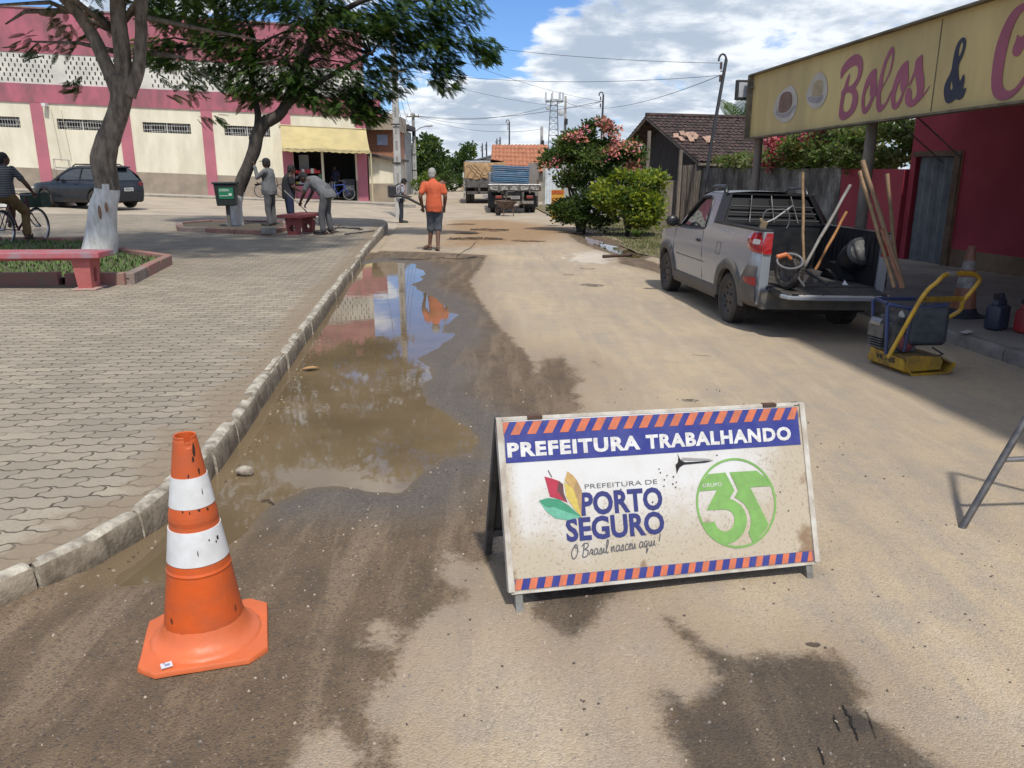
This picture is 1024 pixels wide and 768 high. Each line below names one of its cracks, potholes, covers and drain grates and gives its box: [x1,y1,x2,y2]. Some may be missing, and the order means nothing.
crack [818,705,876,765]
